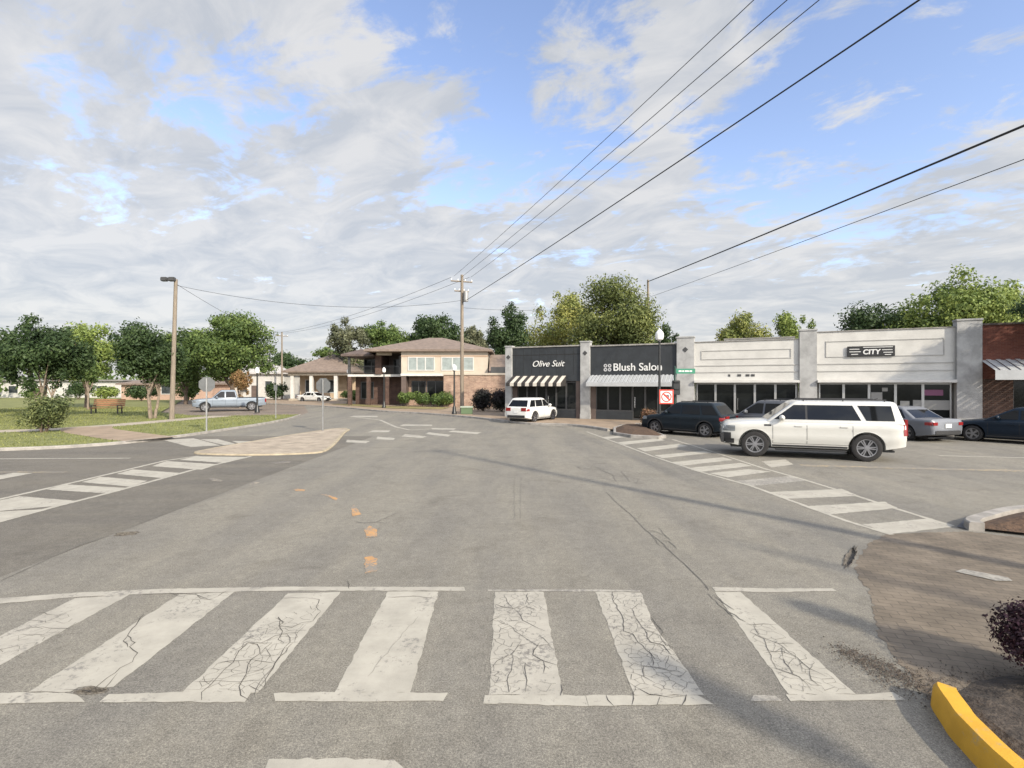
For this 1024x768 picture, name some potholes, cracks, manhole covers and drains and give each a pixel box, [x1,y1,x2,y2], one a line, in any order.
pothole [74,686,109,695]
crack [606,492,846,692]
crack [489,593,563,695]
crack [599,591,696,706]
pothole [842,546,858,568]
crack [198,597,320,700]
crack [69,614,144,693]
